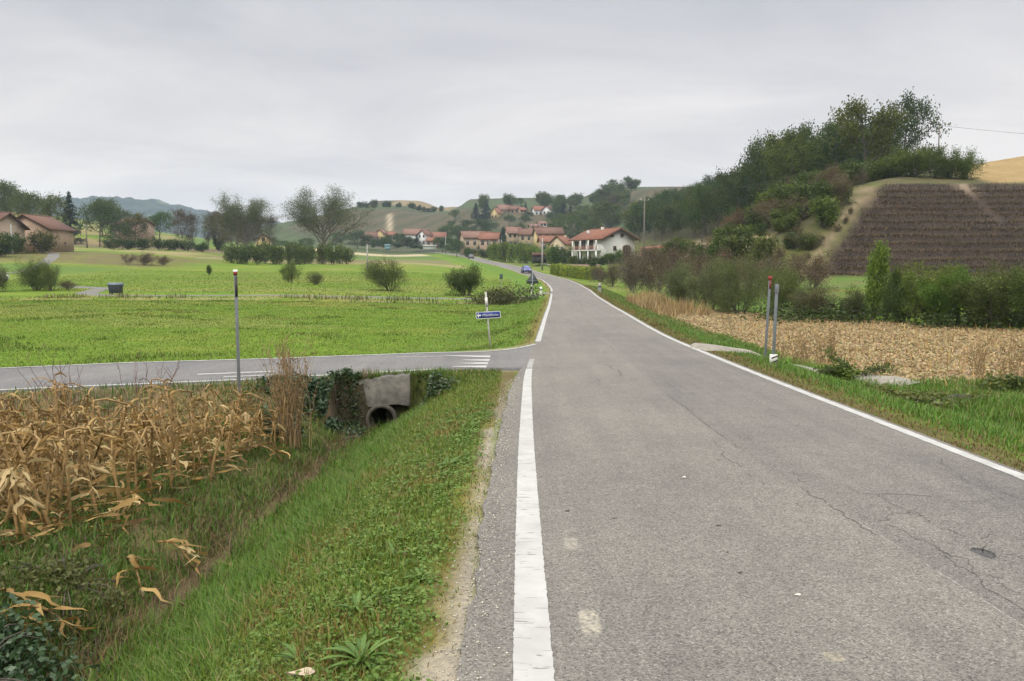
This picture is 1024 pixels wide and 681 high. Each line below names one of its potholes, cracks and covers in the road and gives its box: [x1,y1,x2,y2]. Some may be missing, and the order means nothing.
pothole [970,547,996,559]
crack [665,382,877,535]
crack [857,491,1024,610]
